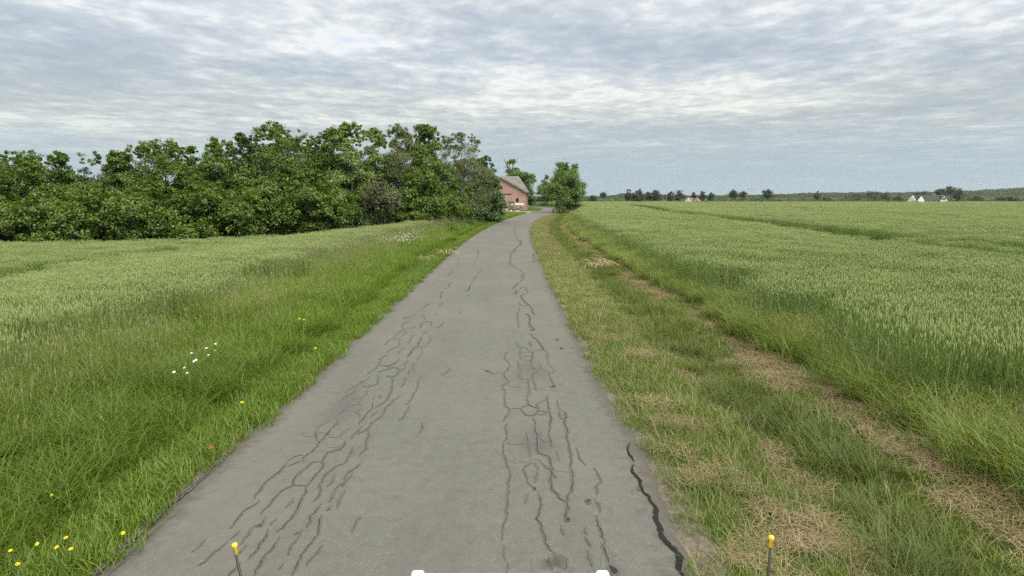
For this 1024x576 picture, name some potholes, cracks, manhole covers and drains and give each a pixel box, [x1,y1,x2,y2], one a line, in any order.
crack [92,250,483,576]
crack [484,228,610,573]
